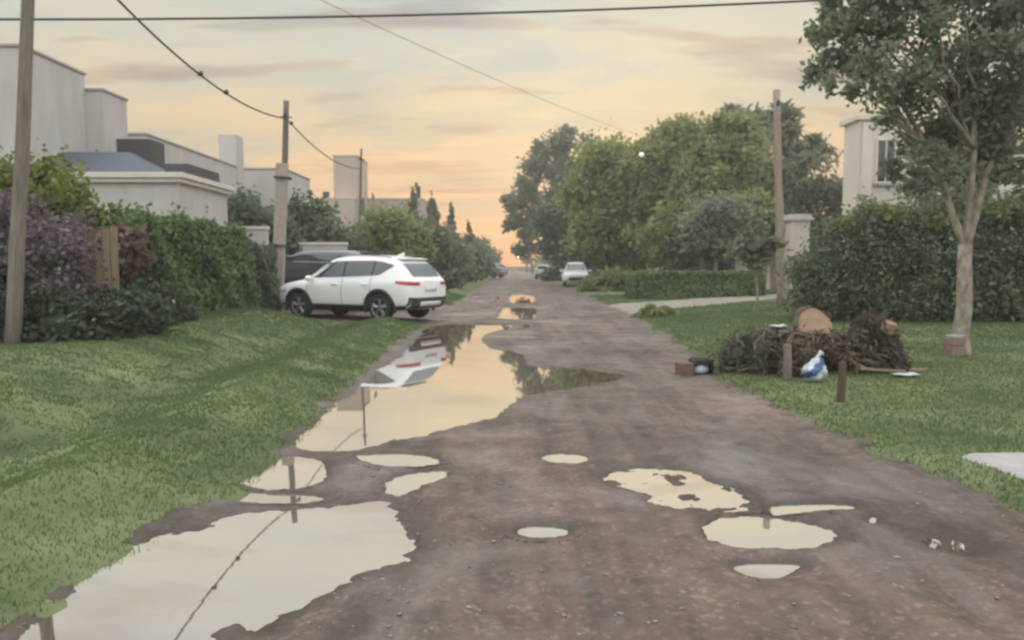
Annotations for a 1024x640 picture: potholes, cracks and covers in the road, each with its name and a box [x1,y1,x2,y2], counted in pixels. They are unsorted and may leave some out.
pothole [275,322,645,458]
pothole [684,511,862,553]
pothole [340,448,458,470]
pothole [366,463,467,499]
pothole [497,516,588,544]
pothole [712,551,823,583]
pothole [582,461,771,516]
pothole [230,450,351,491]
pothole [523,448,607,467]
pothole [758,495,874,518]
pothole [503,294,543,303]
pothole [0,489,453,640]
